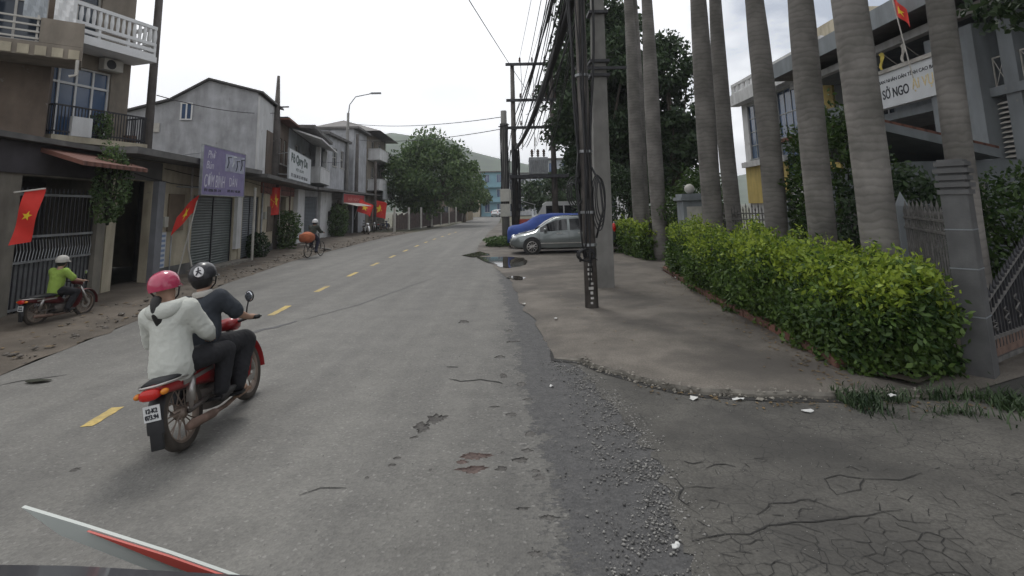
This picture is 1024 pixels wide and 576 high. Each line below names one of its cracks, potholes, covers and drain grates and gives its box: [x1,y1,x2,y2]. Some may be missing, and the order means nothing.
crack [675,456,1024,576]
pothole [426,413,449,424]
pothole [413,421,430,434]
pothole [460,452,493,460]
pothole [454,465,489,474]
